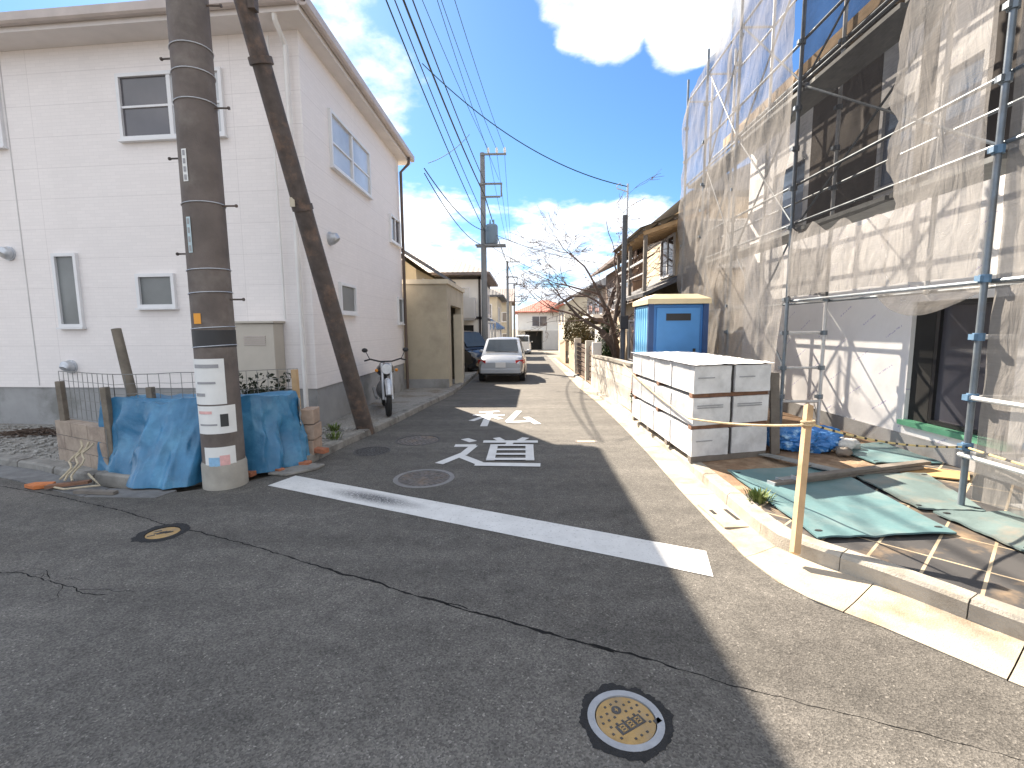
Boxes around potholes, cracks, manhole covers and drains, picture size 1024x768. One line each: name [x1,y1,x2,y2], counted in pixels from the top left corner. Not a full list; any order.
manhole cover [131,523,191,543]
crack [0,486,1024,761]
drain grate [698,503,749,528]
manhole cover [353,446,391,456]
manhole cover [393,469,454,488]
manhole cover [579,683,675,763]
manhole cover [395,435,441,446]
